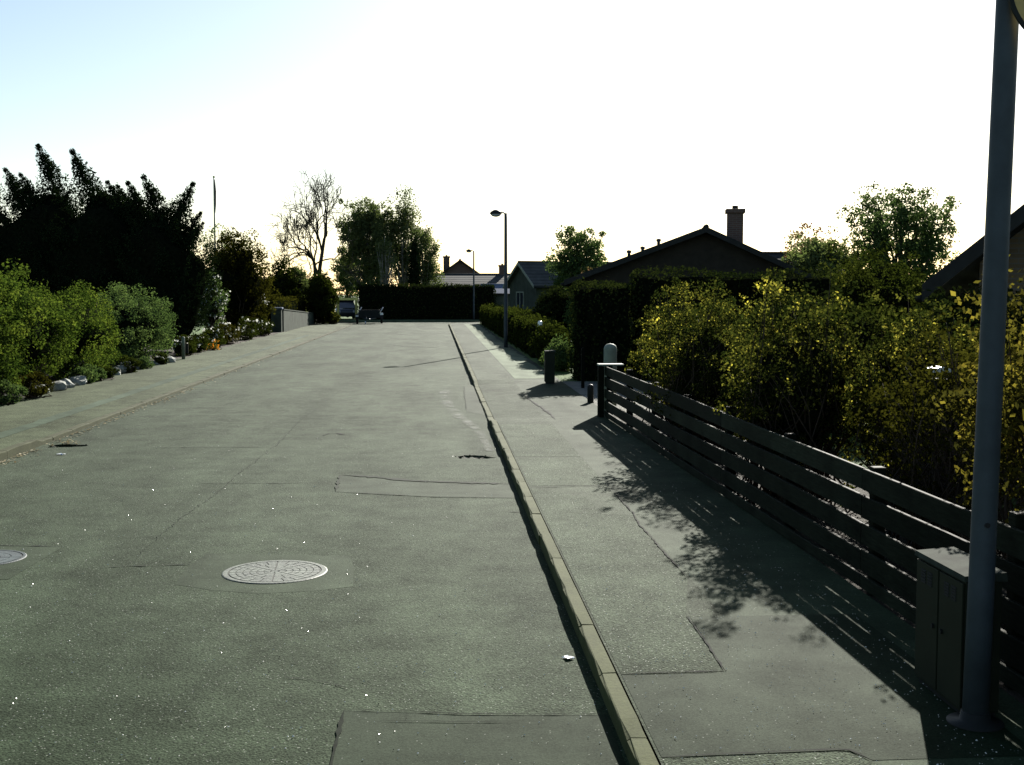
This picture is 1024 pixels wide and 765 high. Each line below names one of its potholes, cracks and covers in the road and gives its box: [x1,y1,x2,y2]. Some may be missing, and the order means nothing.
manhole cover [0,550,27,565]
manhole cover [222,560,327,584]
